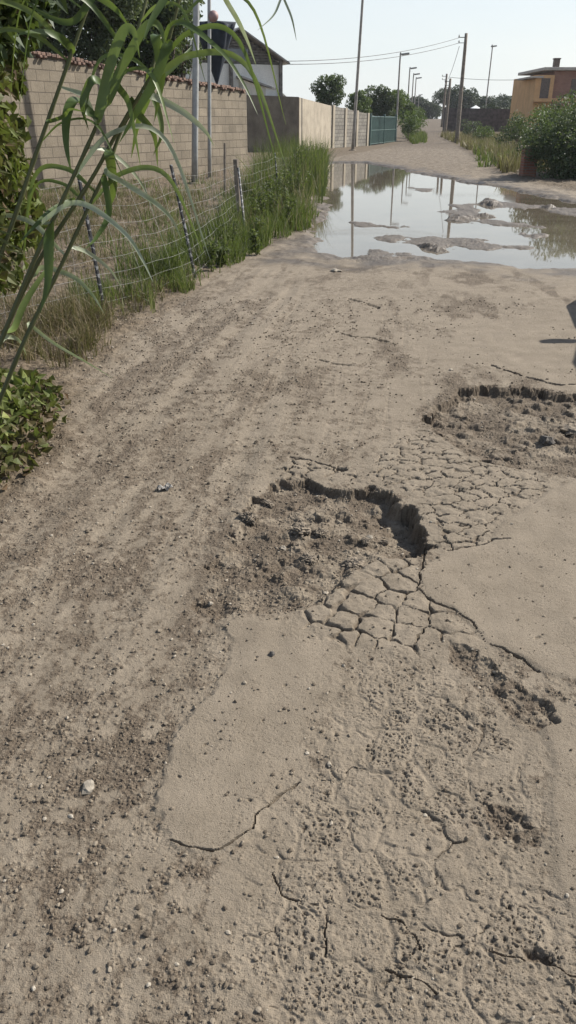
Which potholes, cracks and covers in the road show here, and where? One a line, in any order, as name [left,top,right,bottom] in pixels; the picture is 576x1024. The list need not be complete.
crack [174,783,299,852]
crack [298,435,547,673]
pothole [189,475,437,623]
crack [269,665,576,1024]
pothole [421,384,576,478]
